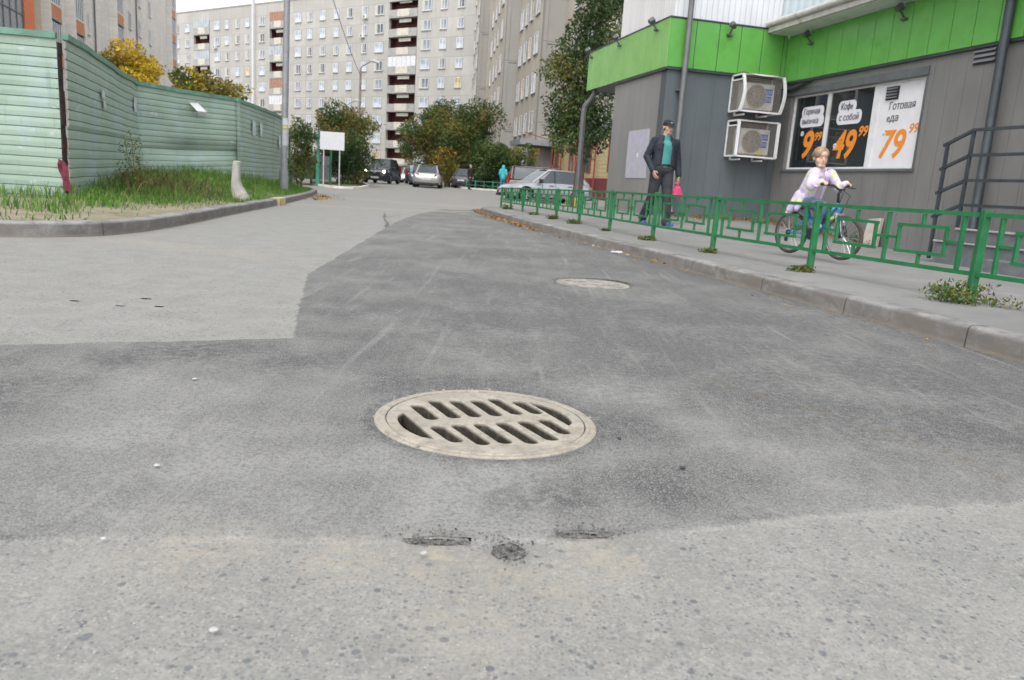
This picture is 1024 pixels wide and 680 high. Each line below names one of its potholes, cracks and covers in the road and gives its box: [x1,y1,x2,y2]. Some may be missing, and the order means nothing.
pothole [385,524,503,549]
manhole cover [550,277,634,289]
pothole [472,525,540,570]
pothole [547,522,640,539]
